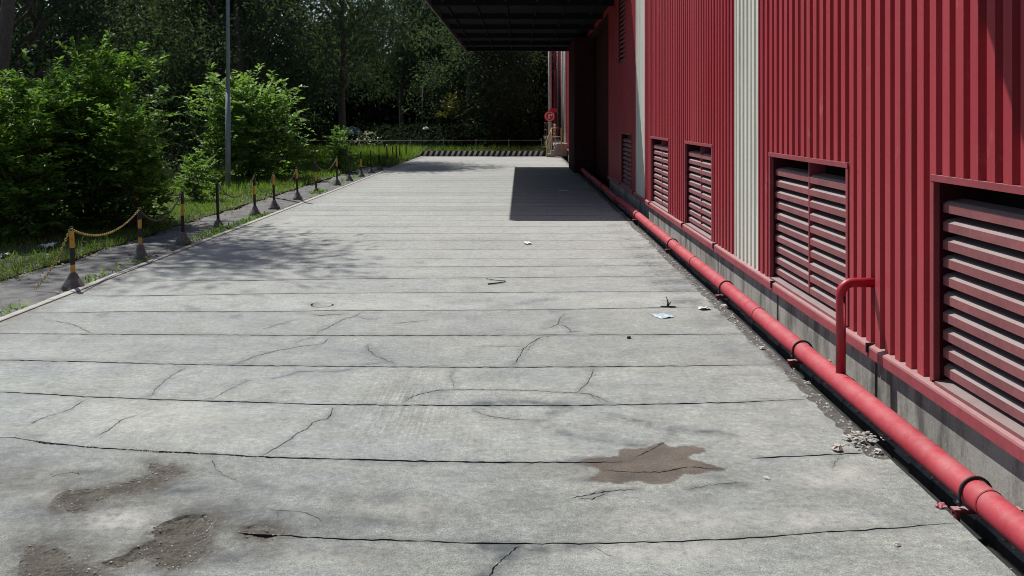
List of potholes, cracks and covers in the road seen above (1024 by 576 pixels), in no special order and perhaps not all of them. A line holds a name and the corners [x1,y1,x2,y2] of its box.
pothole [17,544,110,576]
crack [229,302,365,366]
pothole [50,462,187,514]
pothole [101,513,217,571]
crack [408,370,608,402]
crack [495,315,579,364]
crack [489,546,519,576]
pothole [237,525,281,539]
